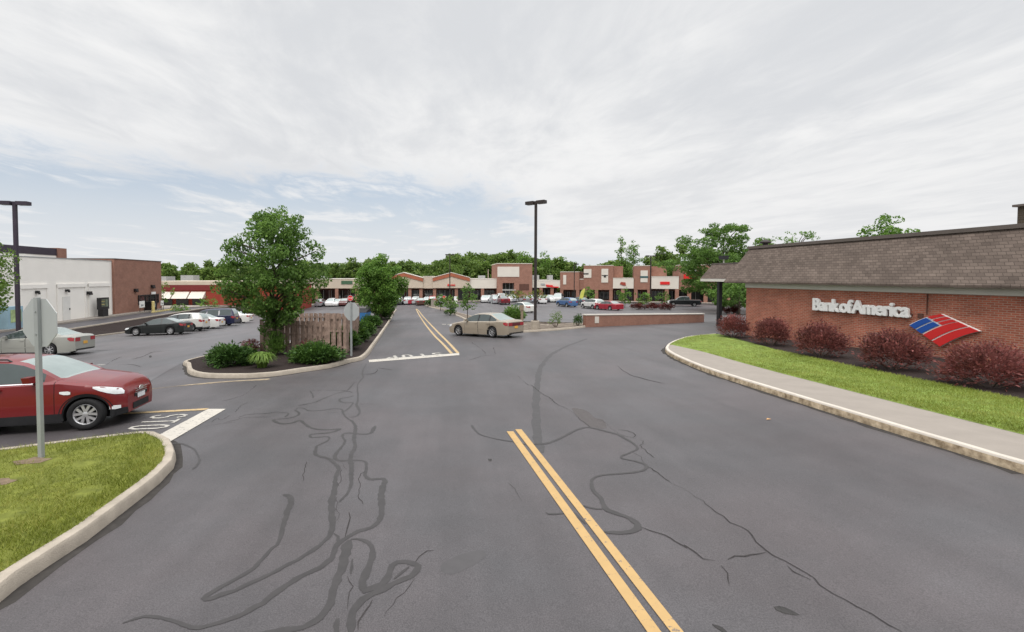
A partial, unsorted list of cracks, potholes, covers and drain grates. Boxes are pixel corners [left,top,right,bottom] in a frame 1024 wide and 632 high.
crack [623,430,901,631]
